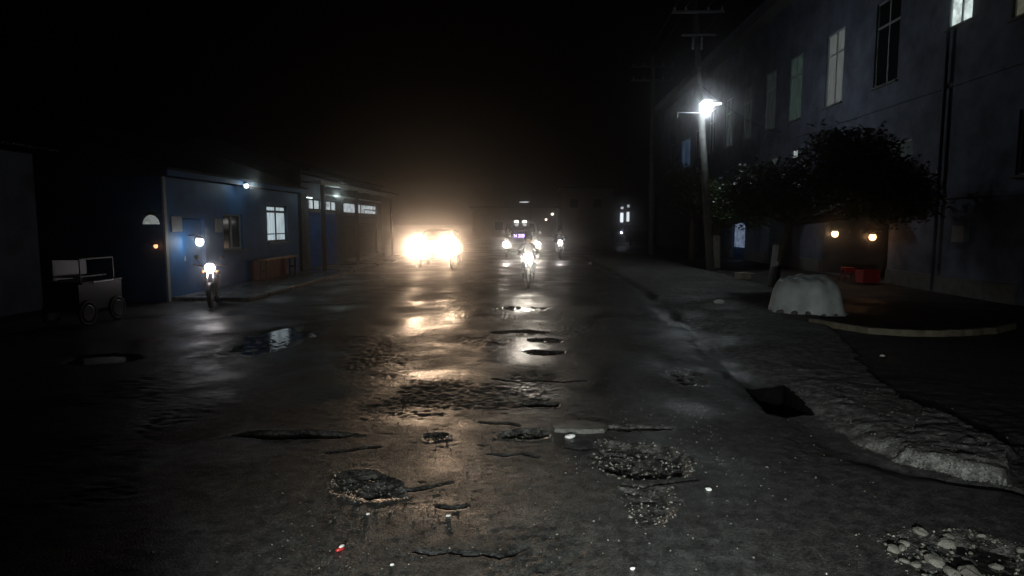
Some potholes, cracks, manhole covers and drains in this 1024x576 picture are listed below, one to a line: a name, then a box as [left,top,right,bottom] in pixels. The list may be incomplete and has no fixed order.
pothole [875,528,1024,576]
pothole [212,325,330,358]
pothole [230,429,361,441]
pothole [587,439,696,481]
pothole [59,353,143,365]
pothole [328,469,409,503]
pothole [421,432,449,442]
crack [411,548,527,560]
pothole [517,400,562,408]
pothole [613,486,687,528]
pothole [495,427,551,441]
